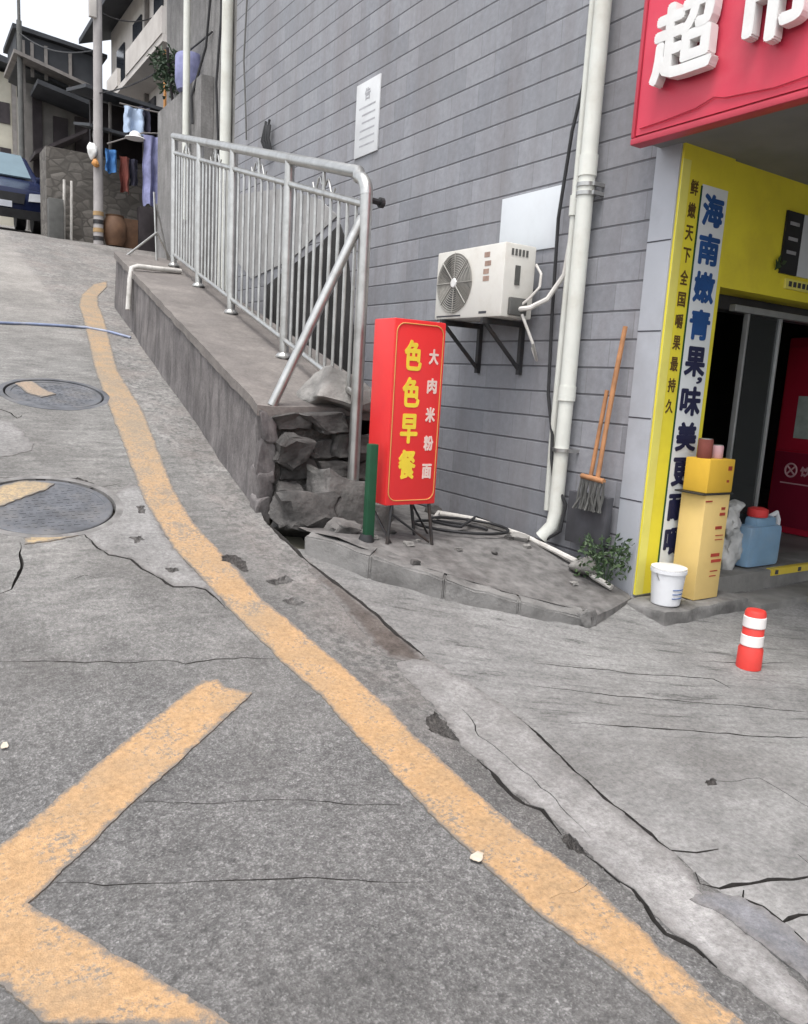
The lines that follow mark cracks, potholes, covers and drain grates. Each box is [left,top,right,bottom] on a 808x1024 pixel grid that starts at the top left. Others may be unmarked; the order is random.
crack [538,686,804,712]
pothole [426,711,459,741]
manhole cover [0,476,124,538]
crack [59,877,404,886]
crack [571,723,802,738]
crack [548,661,793,688]
pothole [221,554,249,572]
manhole cover [0,378,110,411]
pothole [266,575,294,586]
crack [468,715,567,835]
crack [0,524,424,665]
pothole [561,834,587,855]
